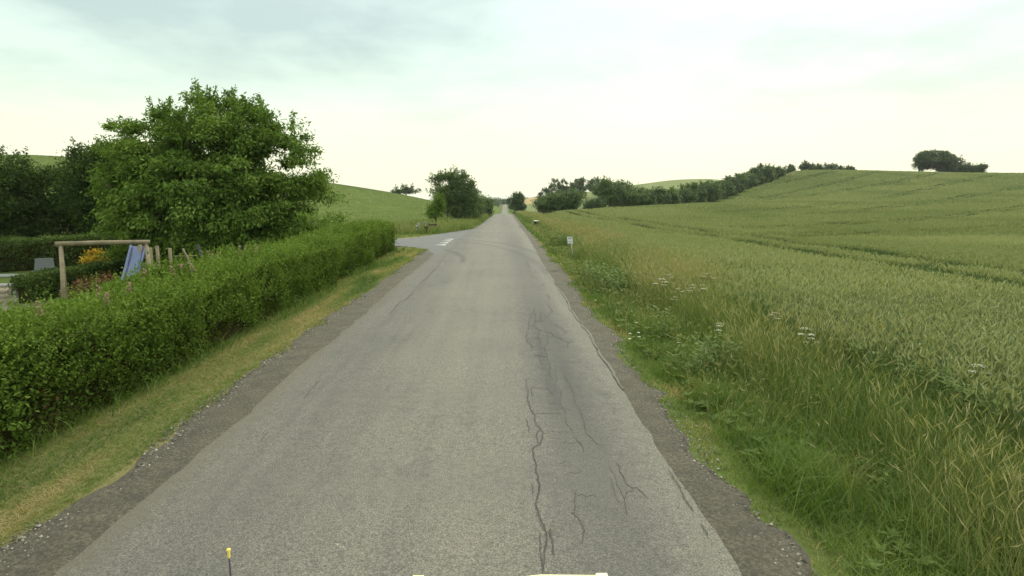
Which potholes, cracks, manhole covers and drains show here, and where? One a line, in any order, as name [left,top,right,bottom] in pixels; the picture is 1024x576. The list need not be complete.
crack [525,261,648,573]
